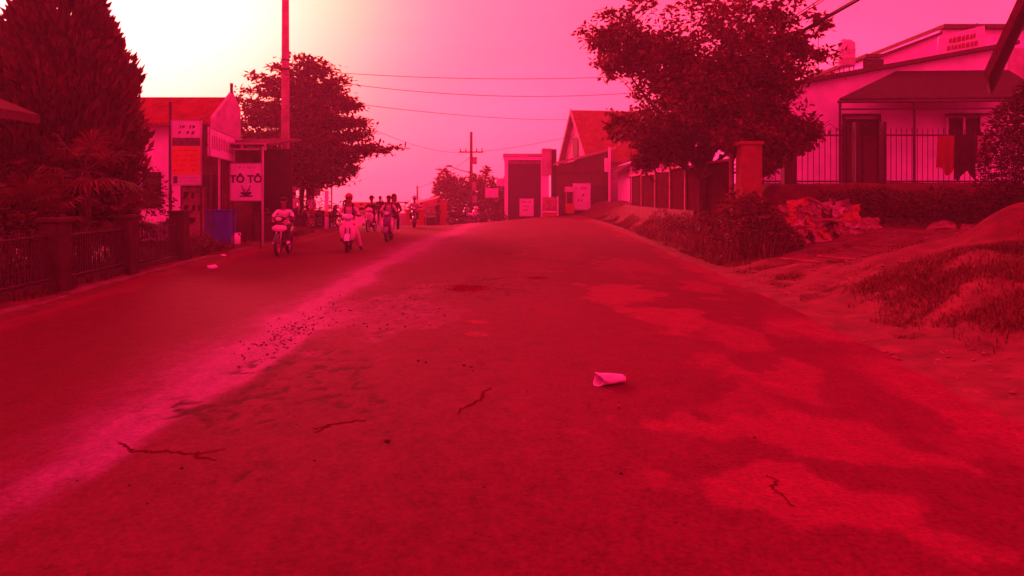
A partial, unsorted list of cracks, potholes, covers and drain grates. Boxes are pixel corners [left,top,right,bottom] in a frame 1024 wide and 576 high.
crack [313,420,367,433]
crack [118,442,226,461]
pothole [445,284,489,293]
crack [457,387,492,415]
crack [766,475,794,507]
